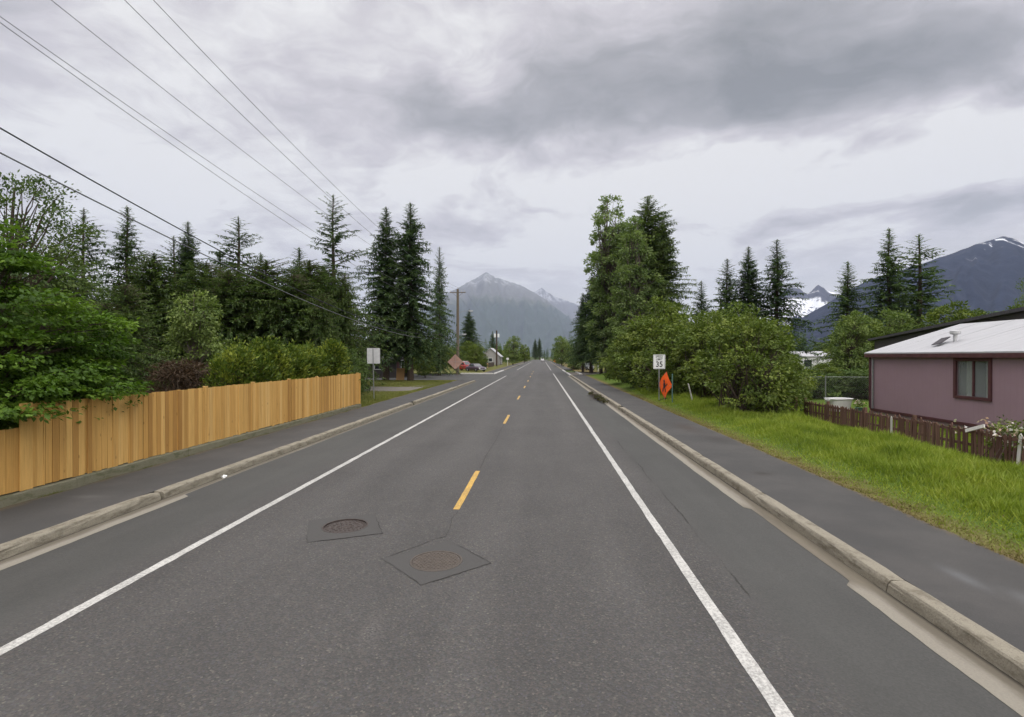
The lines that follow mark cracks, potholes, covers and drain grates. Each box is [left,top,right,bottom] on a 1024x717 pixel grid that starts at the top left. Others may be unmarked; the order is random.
manhole cover [322,518,368,533]
manhole cover [410,551,463,572]
